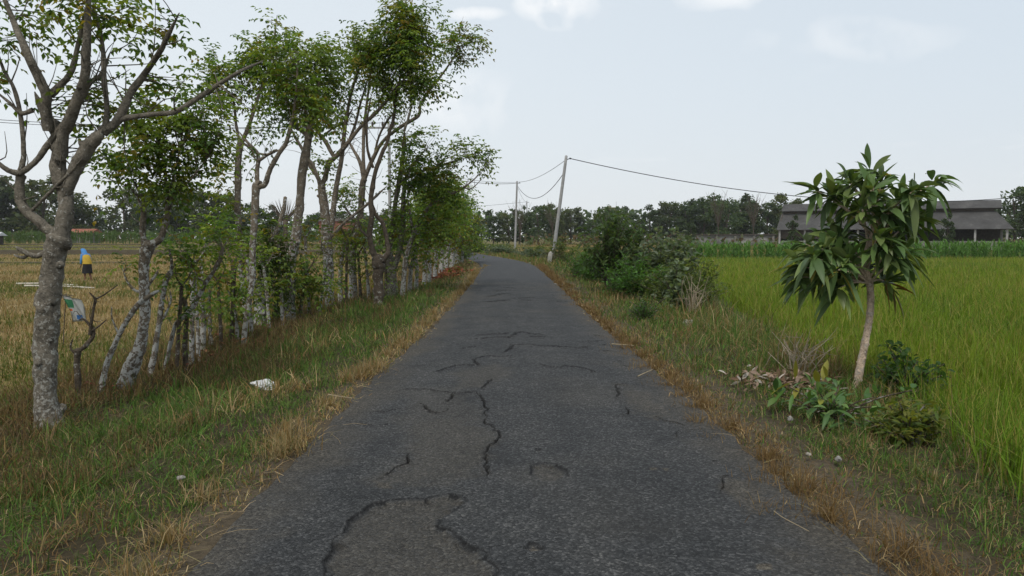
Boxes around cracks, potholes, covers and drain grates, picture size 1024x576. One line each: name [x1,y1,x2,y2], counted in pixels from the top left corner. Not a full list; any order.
crack [392,331,632,476]
crack [711,460,731,491]
crack [380,453,411,477]
